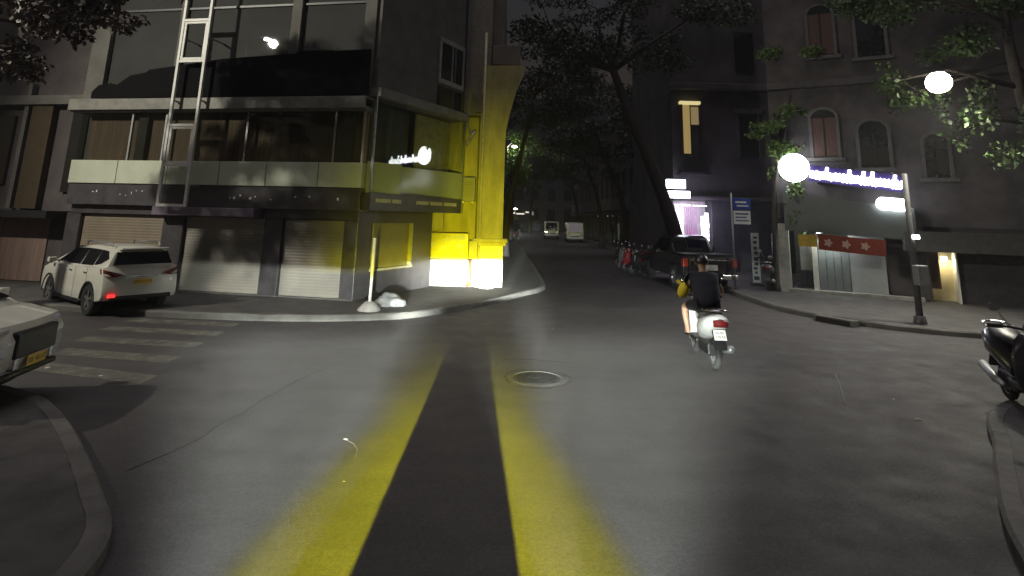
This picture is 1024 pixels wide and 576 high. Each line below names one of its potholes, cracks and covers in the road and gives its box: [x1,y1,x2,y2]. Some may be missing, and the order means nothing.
crack [126,365,333,471]
manhole cover [504,369,572,389]
